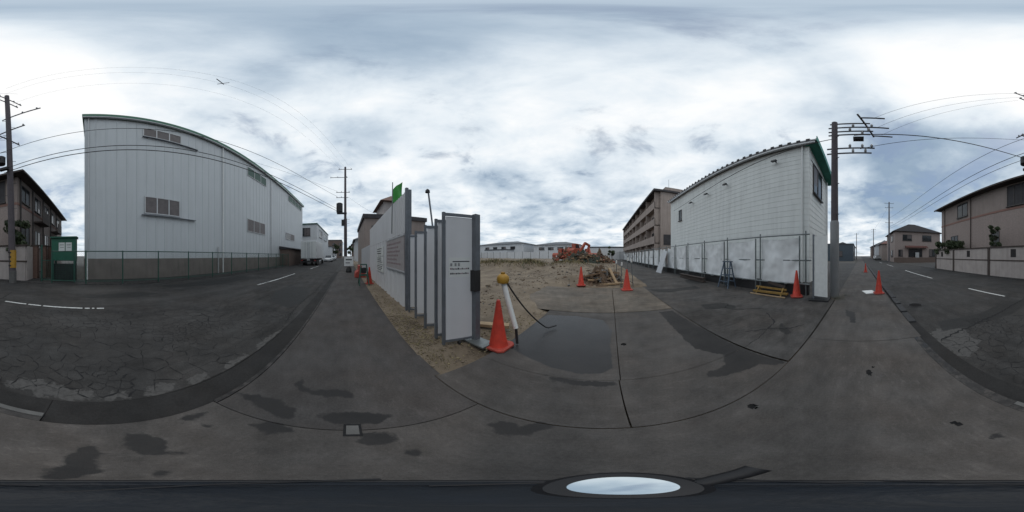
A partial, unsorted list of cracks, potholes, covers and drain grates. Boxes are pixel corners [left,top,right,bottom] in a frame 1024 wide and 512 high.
crack [0,300,1024,398]
